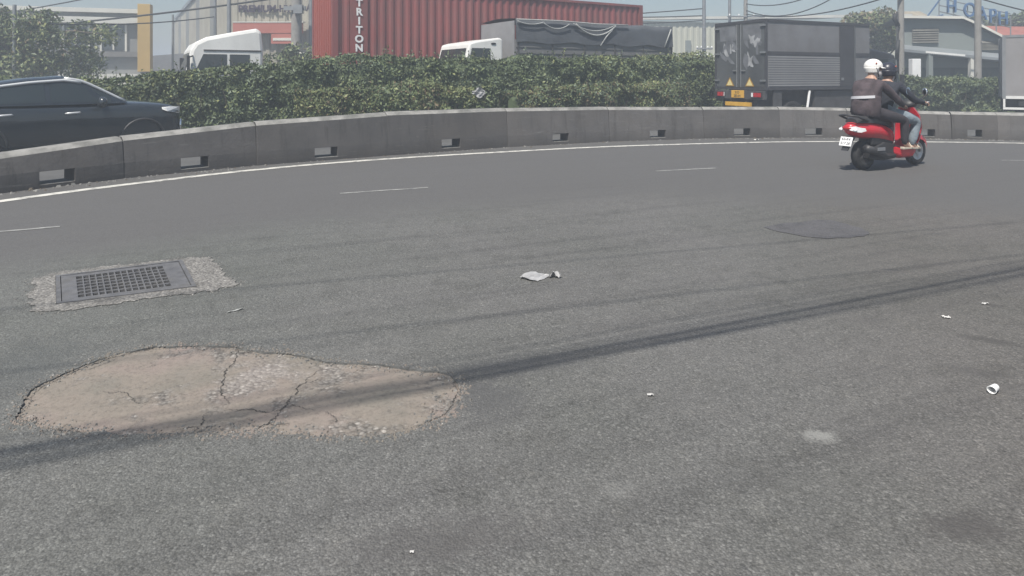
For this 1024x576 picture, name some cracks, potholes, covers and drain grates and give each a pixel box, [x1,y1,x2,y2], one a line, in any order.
drain grate [26,256,239,312]
crack [226,373,315,432]
crack [220,349,252,403]
